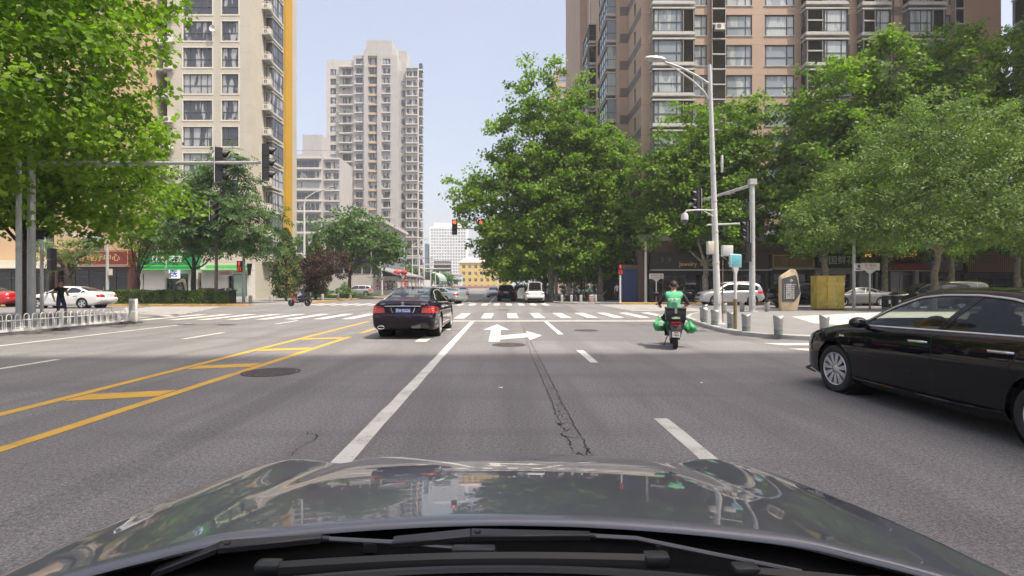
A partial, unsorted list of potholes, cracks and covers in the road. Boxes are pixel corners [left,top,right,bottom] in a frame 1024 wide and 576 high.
crack [520,323,593,455]
manhole cover [240,368,301,377]
